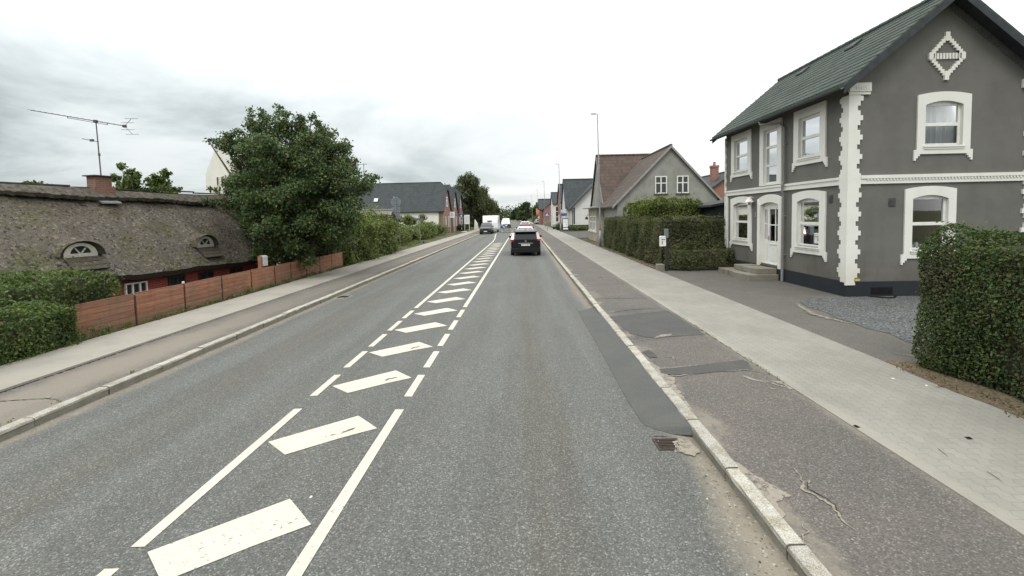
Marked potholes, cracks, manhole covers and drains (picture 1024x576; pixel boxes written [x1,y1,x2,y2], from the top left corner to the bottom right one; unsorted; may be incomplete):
crack [793,467,855,543]
drain grate [652,438,680,451]
